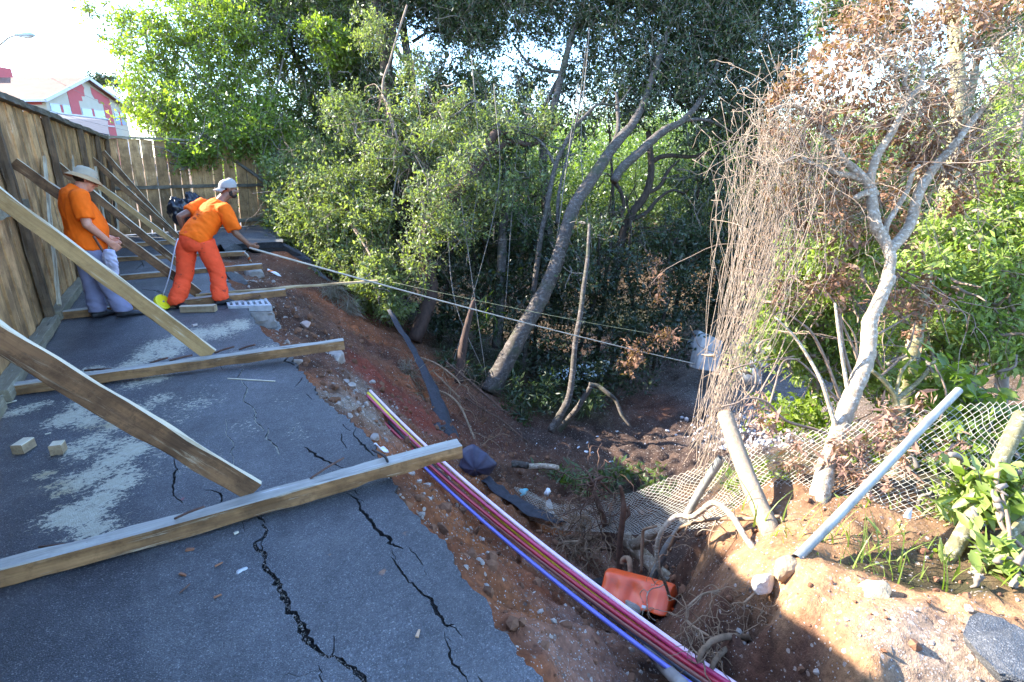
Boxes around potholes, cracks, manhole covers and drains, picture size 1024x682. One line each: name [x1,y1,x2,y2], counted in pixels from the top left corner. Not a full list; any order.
crack [160,458,182,502]
crack [242,486,483,682]
crack [220,366,375,468]
